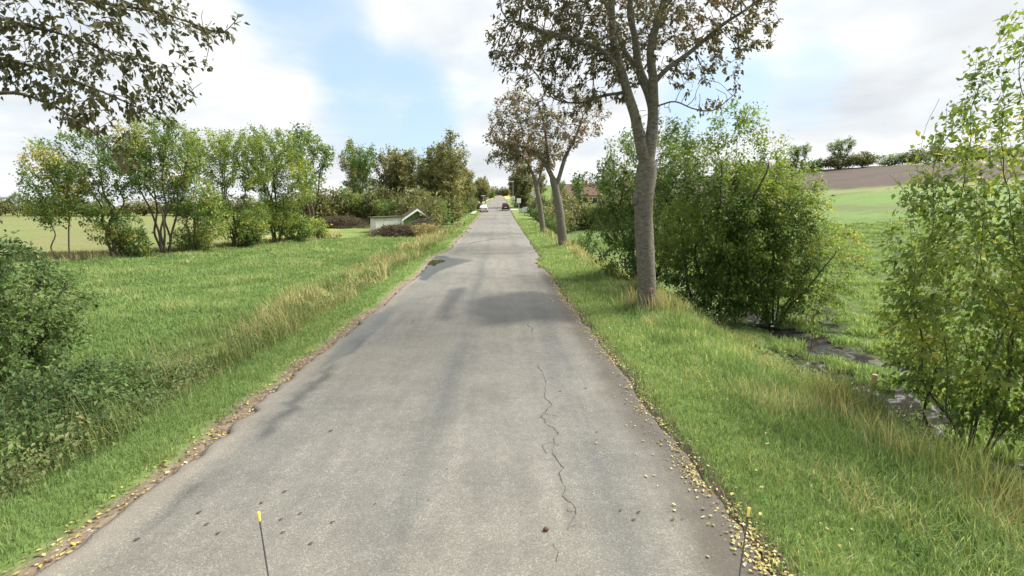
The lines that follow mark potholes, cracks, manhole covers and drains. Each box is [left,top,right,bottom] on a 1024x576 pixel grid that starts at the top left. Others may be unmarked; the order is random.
crack [538,366,576,530]
